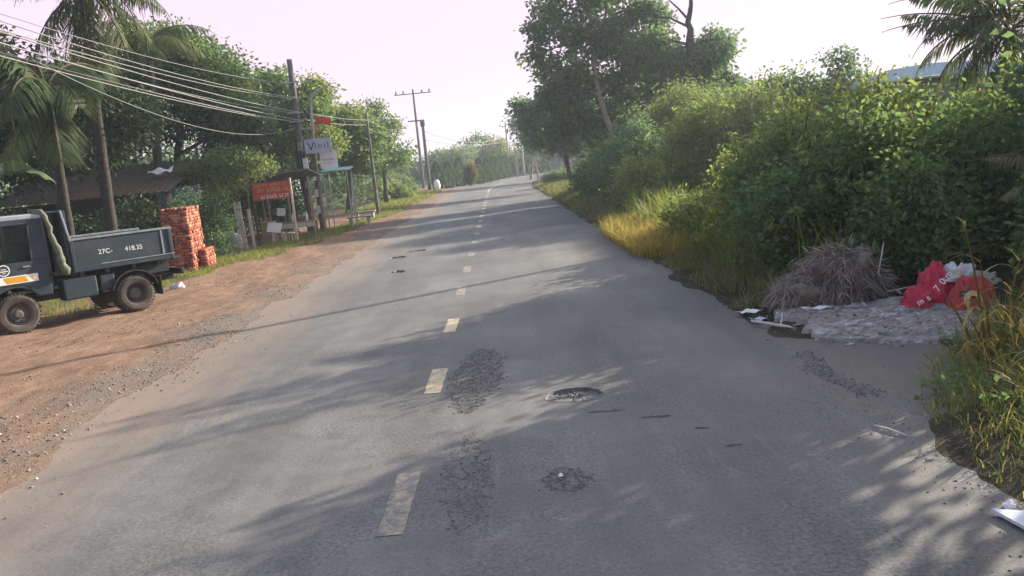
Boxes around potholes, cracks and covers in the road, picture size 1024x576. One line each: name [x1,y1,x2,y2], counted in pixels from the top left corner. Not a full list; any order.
crack [435,431,495,536]
crack [446,348,508,414]
pothole [544,387,605,402]
